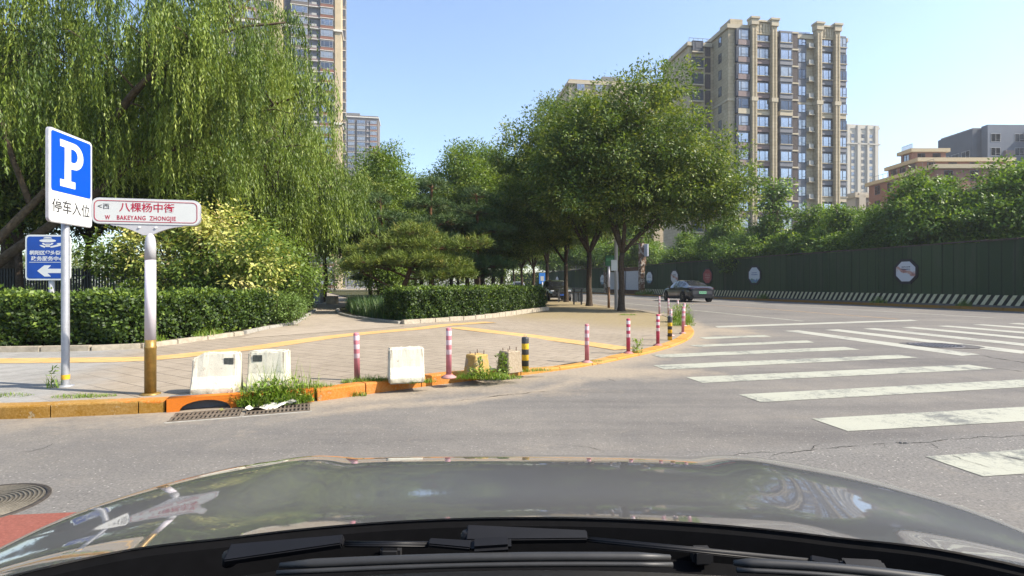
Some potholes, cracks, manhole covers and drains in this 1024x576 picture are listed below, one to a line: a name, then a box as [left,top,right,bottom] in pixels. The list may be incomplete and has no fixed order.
drain grate [241,403,312,417]
drain grate [164,408,243,424]
crack [736,435,1024,467]
manhole cover [0,483,52,518]
